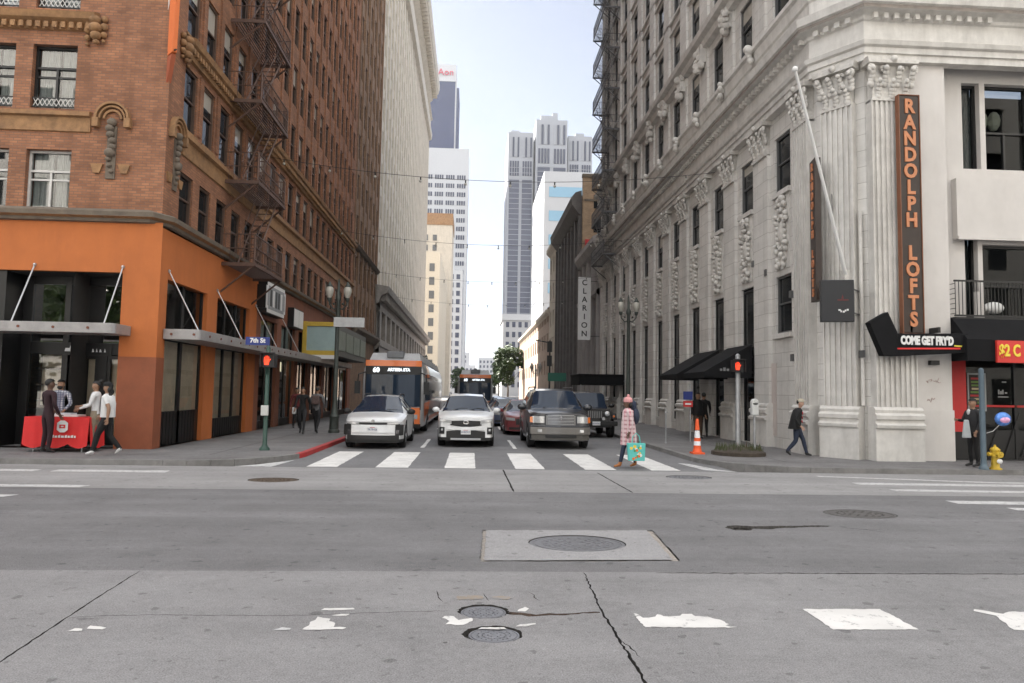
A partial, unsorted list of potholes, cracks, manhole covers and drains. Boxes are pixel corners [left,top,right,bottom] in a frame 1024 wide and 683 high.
manhole cover [462,626,522,643]
crack [509,592,600,617]
manhole cover [457,604,509,619]
manhole cover [823,509,898,519]
manhole cover [528,535,626,552]
